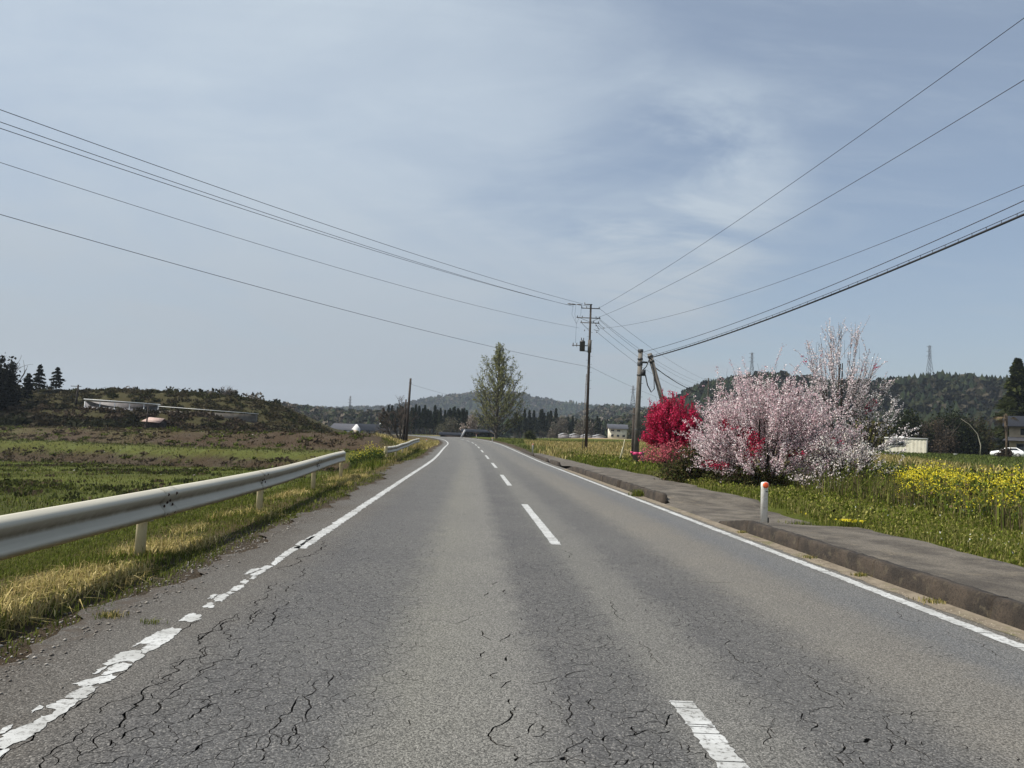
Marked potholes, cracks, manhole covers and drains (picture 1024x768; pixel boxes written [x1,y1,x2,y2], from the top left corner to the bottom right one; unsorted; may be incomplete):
crack [477,539,714,768]
crack [589,540,1020,768]
crack [0,518,448,768]
